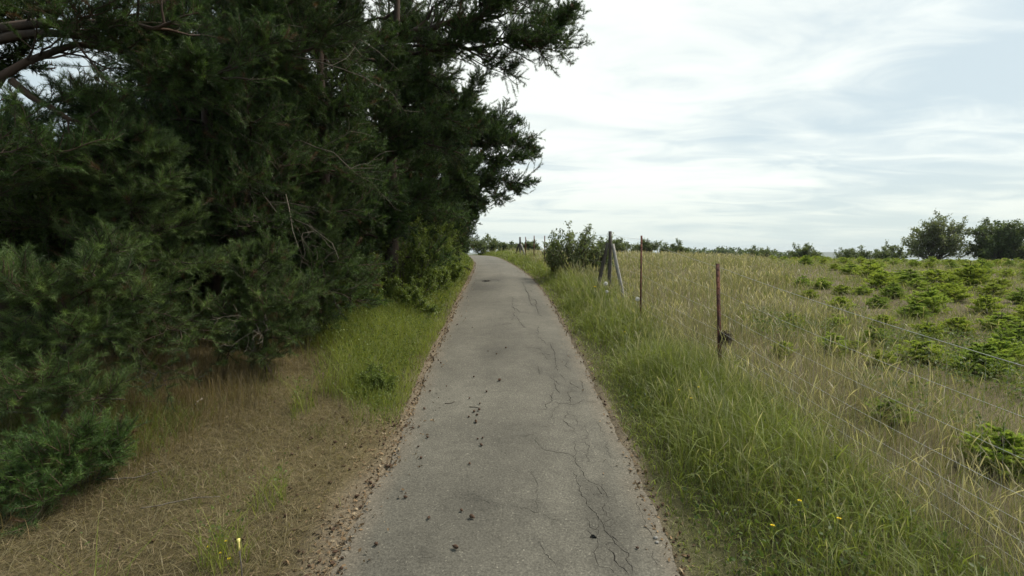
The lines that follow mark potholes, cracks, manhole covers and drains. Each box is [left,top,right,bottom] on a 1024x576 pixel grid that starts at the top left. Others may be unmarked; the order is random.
crack [508,290,633,573]
